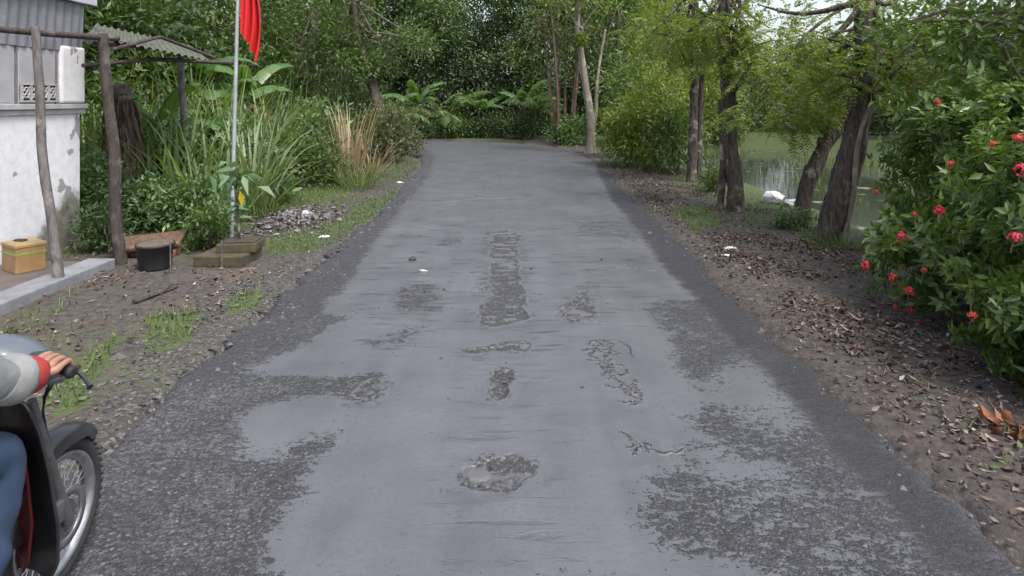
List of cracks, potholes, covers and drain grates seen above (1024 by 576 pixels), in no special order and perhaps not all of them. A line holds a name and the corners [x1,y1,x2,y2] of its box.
pothole [453,452,543,494]
crack [618,430,688,456]
pothole [475,230,535,328]
pothole [484,365,518,402]
pothole [459,340,534,355]
